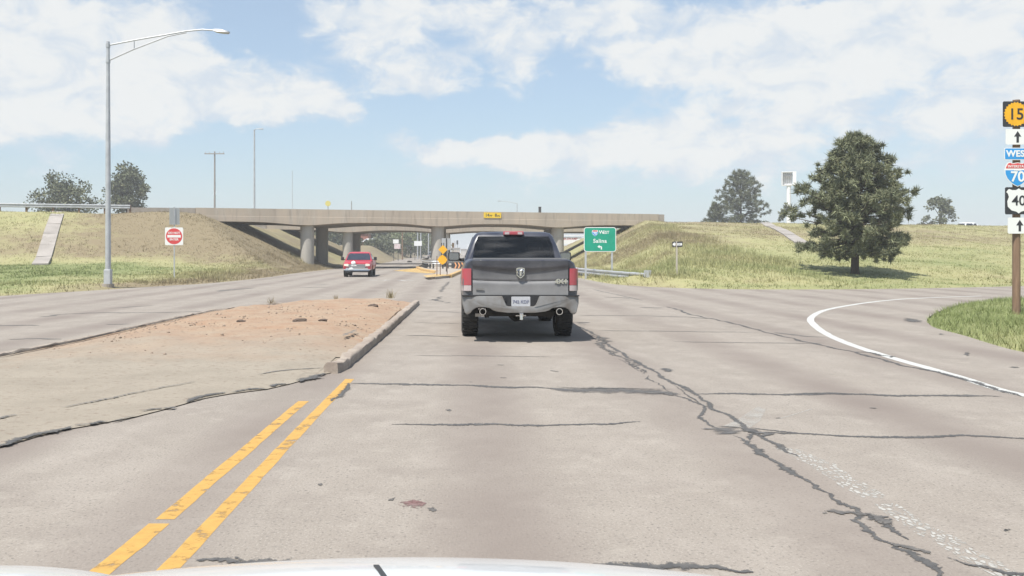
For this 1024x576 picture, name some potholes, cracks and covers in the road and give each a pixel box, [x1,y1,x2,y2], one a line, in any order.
crack [423,290,944,576]
crack [0,367,325,446]
